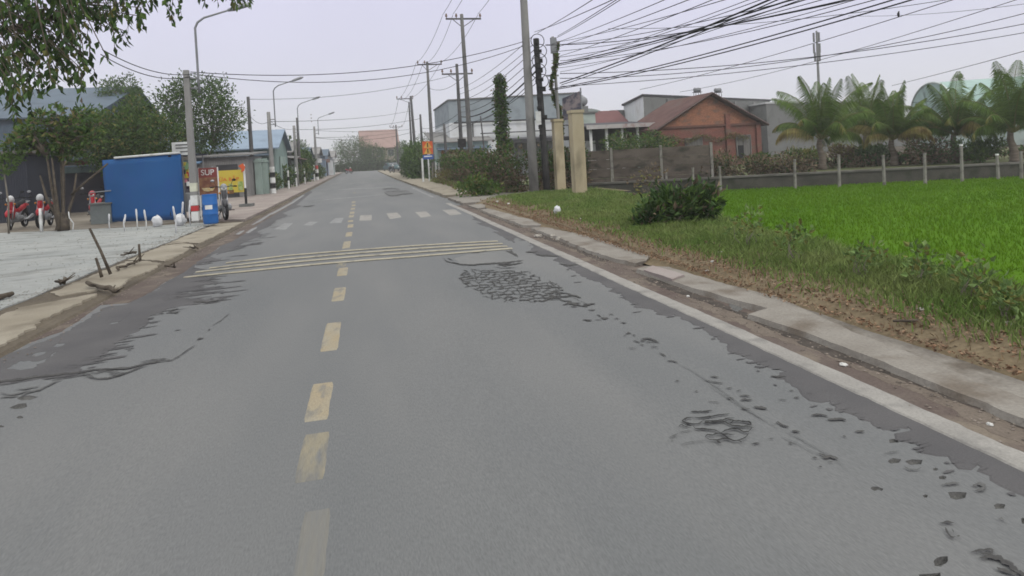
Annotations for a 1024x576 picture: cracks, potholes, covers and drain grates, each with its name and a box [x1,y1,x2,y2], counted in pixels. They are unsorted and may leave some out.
pothole [948,492,966,500]
crack [670,363,865,467]
crack [446,250,677,362]
pothole [934,556,948,567]
